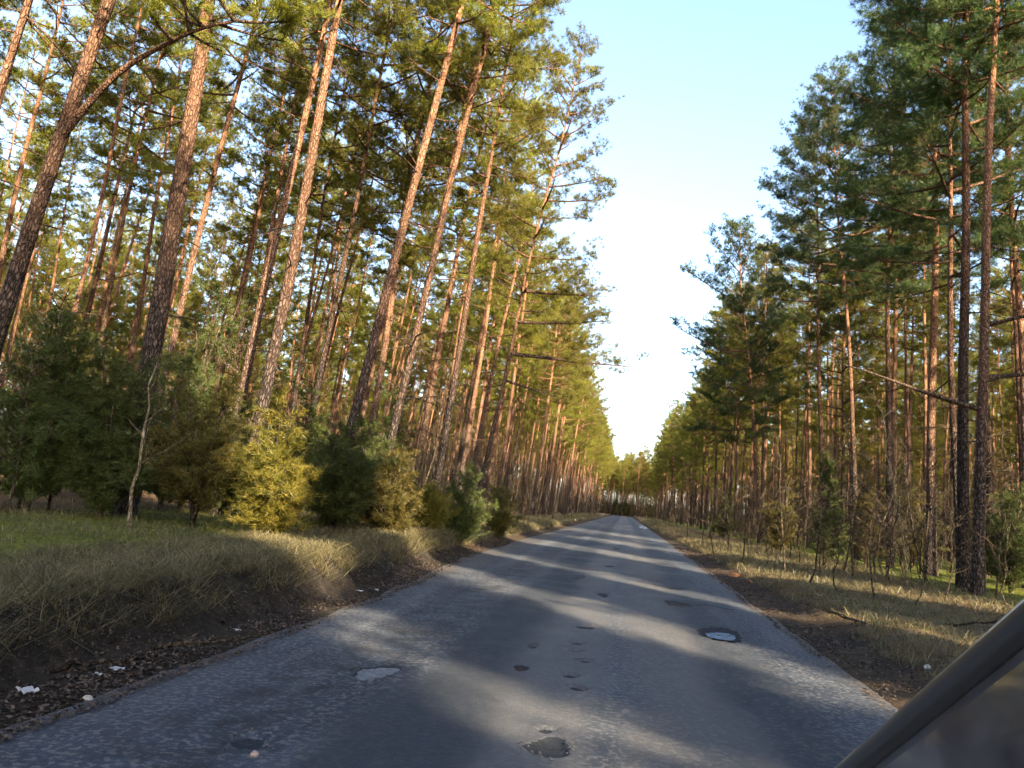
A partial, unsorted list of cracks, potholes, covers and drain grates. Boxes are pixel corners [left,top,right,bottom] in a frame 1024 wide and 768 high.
pothole [218,727,283,750]
pothole [534,725,561,734]
pothole [517,735,578,761]
pothole [692,624,748,645]
pothole [348,661,407,685]
pothole [566,683,591,691]
